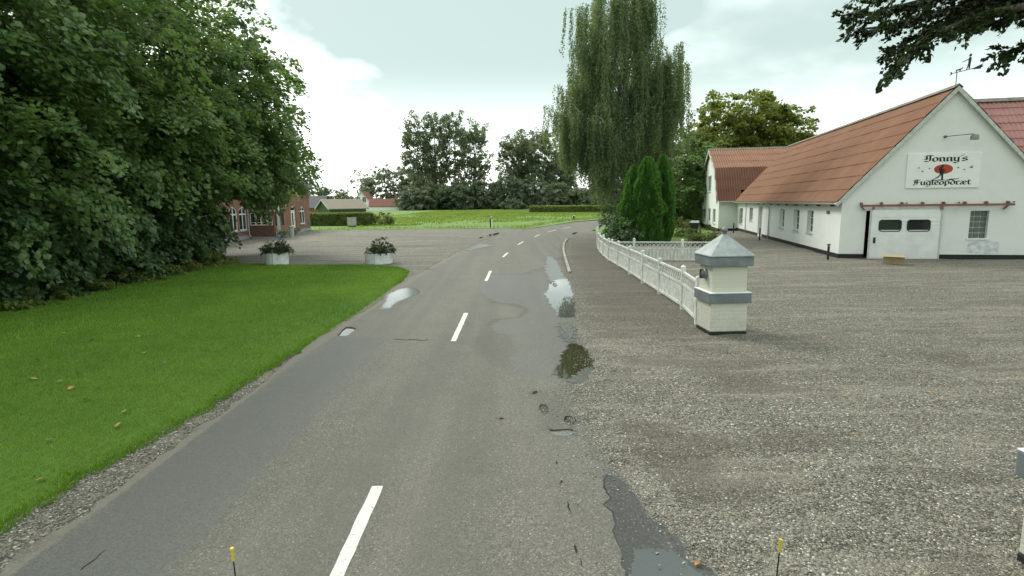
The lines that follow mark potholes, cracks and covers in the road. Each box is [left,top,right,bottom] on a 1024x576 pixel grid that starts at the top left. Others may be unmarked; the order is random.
crack [556,455,582,565]
